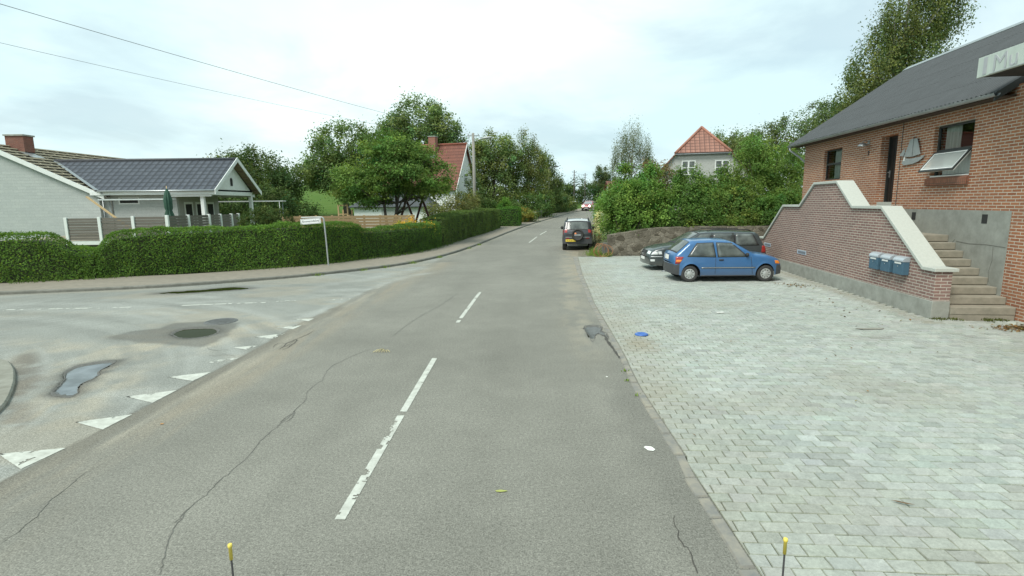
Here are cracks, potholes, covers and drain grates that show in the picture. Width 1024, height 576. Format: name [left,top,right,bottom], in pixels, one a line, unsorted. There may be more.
crack [2,469,93,543]
pothole [583,325,609,342]
pothole [170,327,220,339]
crack [159,350,367,574]
pothole [50,360,116,398]
crack [673,516,698,573]
